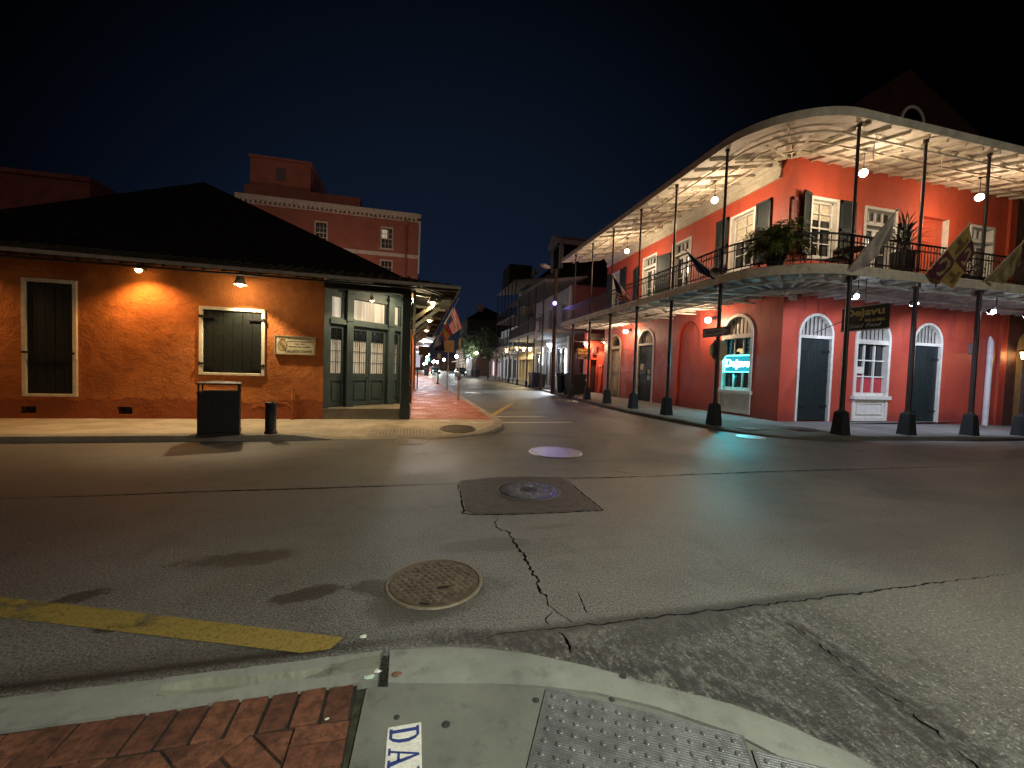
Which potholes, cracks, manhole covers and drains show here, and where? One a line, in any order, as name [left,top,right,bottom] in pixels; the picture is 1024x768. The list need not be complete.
manhole cover [495,481,561,501]
crack [458,479,604,653]
manhole cover [384,559,482,610]
crack [786,621,979,768]
manhole cover [440,425,476,433]
